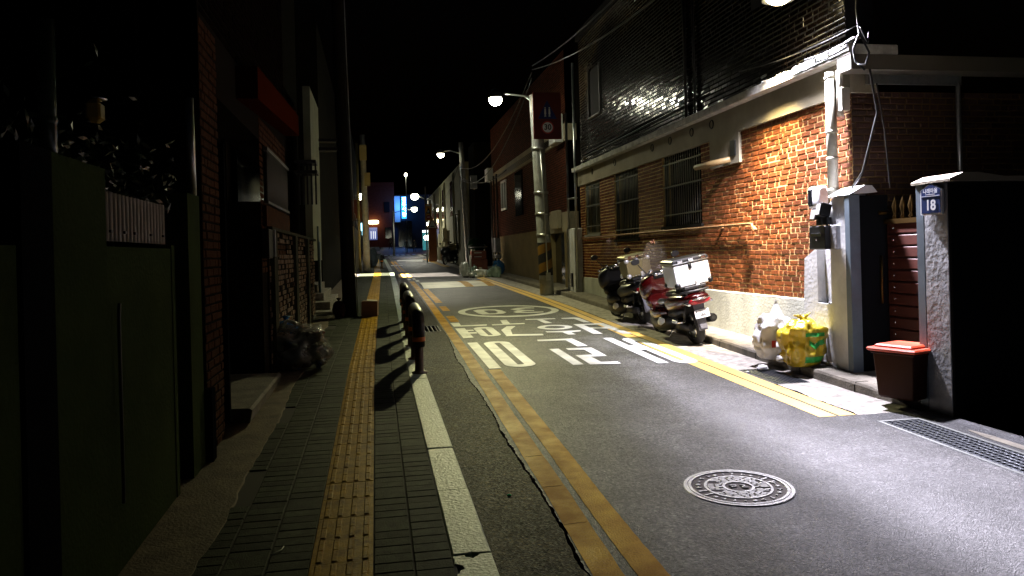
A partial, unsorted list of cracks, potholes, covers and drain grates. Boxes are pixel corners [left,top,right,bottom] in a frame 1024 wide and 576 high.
manhole cover [683,470,796,507]
drain grate [878,418,1024,477]
crack [434,317,591,576]
drain grate [739,368,809,391]
